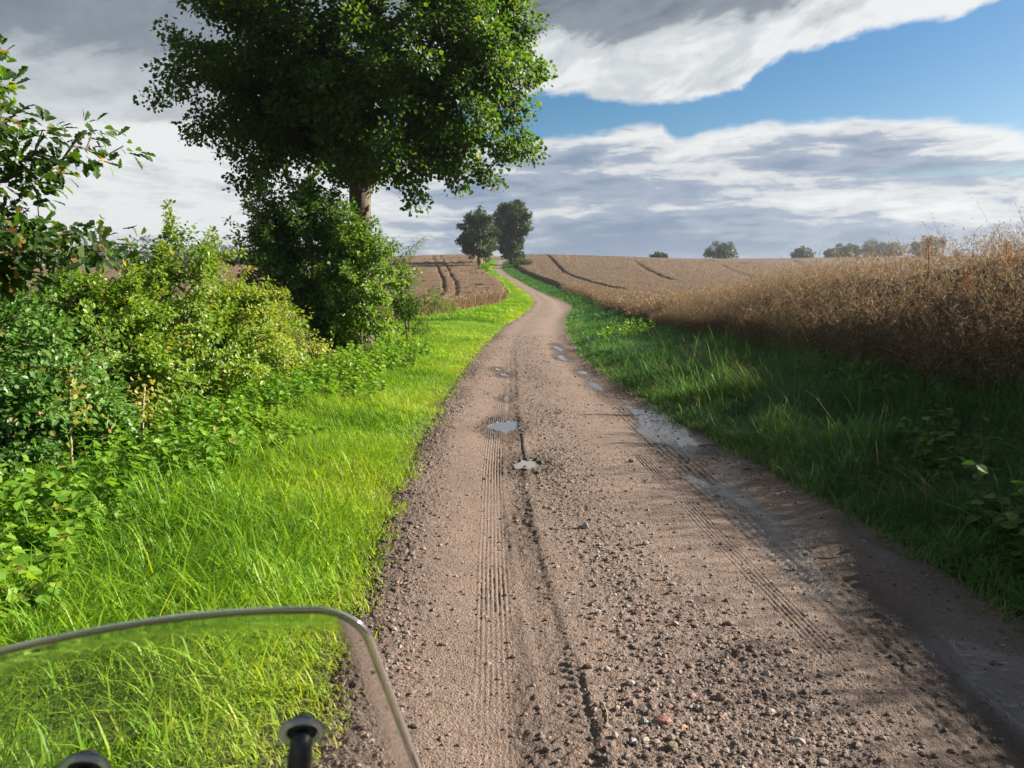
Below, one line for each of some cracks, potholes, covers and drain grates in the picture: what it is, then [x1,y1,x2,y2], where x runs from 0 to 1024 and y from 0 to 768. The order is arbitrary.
pothole [486,420,522,433]
pothole [512,457,543,470]
